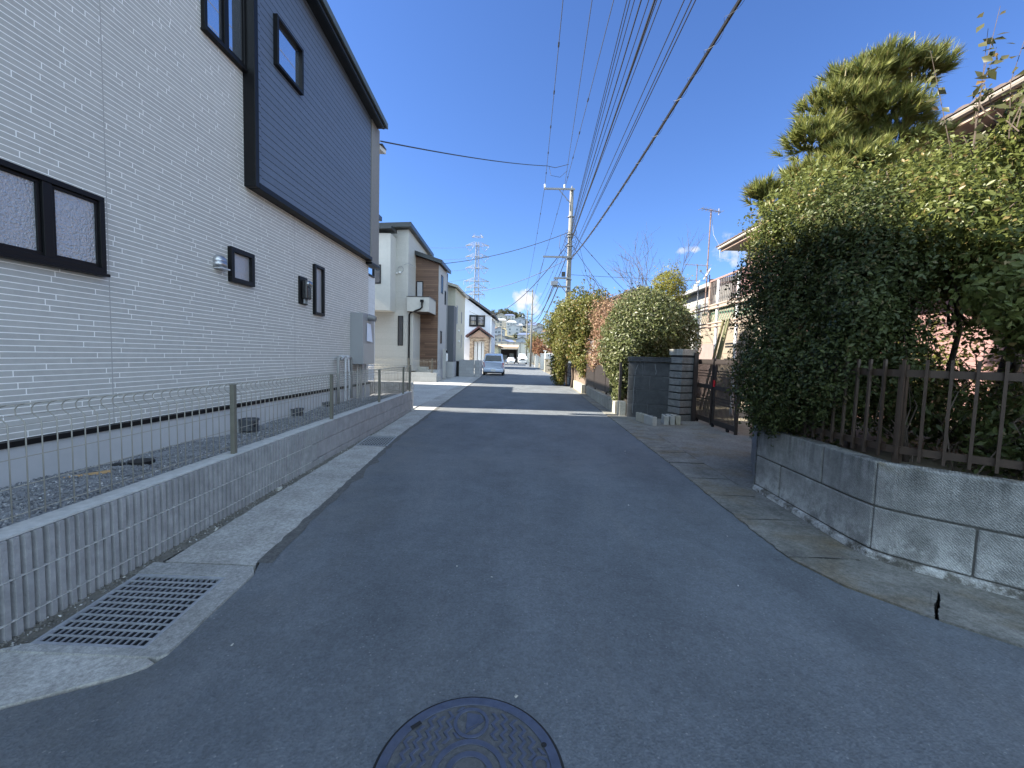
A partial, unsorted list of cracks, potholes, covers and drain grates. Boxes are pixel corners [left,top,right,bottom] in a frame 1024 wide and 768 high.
drain grate [356,436,397,446]
manhole cover [373,697,564,768]
drain grate [0,562,254,664]
